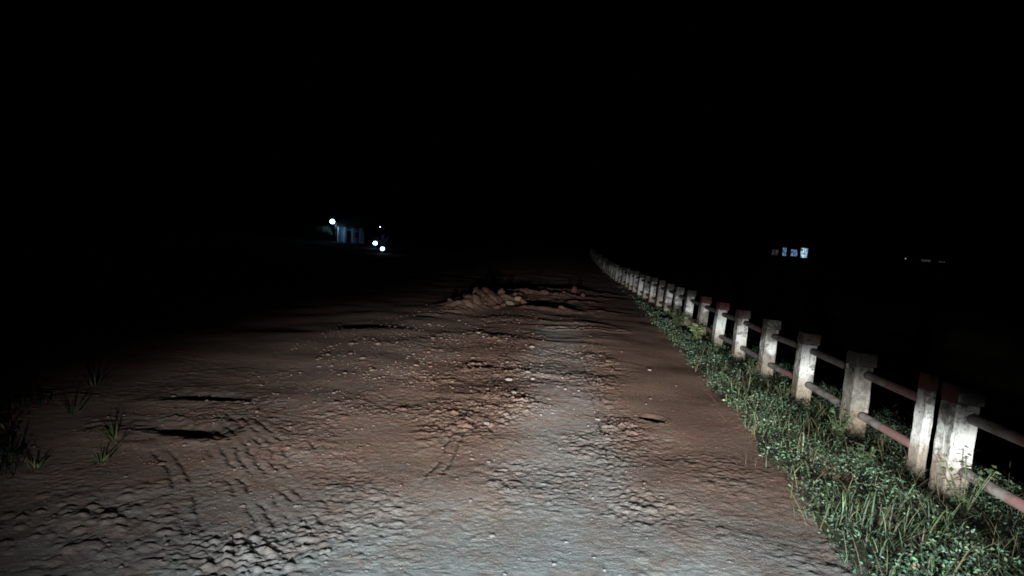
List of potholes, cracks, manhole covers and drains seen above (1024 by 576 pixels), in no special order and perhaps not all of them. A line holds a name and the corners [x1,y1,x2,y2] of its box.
pothole [632,412,670,423]
pothole [517,296,600,314]
pothole [153,386,285,404]
pothole [79,417,246,442]
